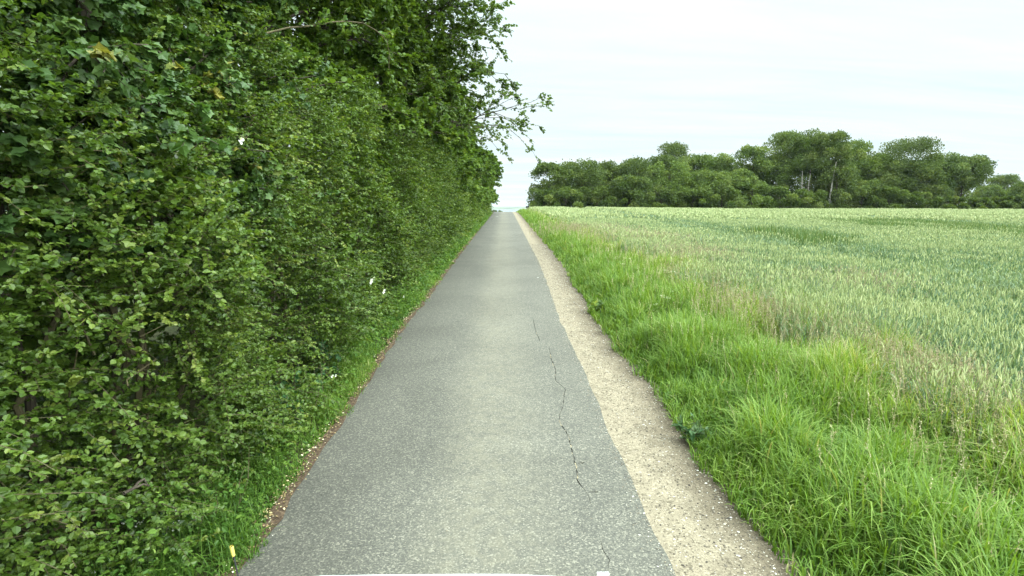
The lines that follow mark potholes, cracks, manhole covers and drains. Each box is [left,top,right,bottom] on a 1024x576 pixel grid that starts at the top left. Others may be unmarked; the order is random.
crack [533,320,591,503]
